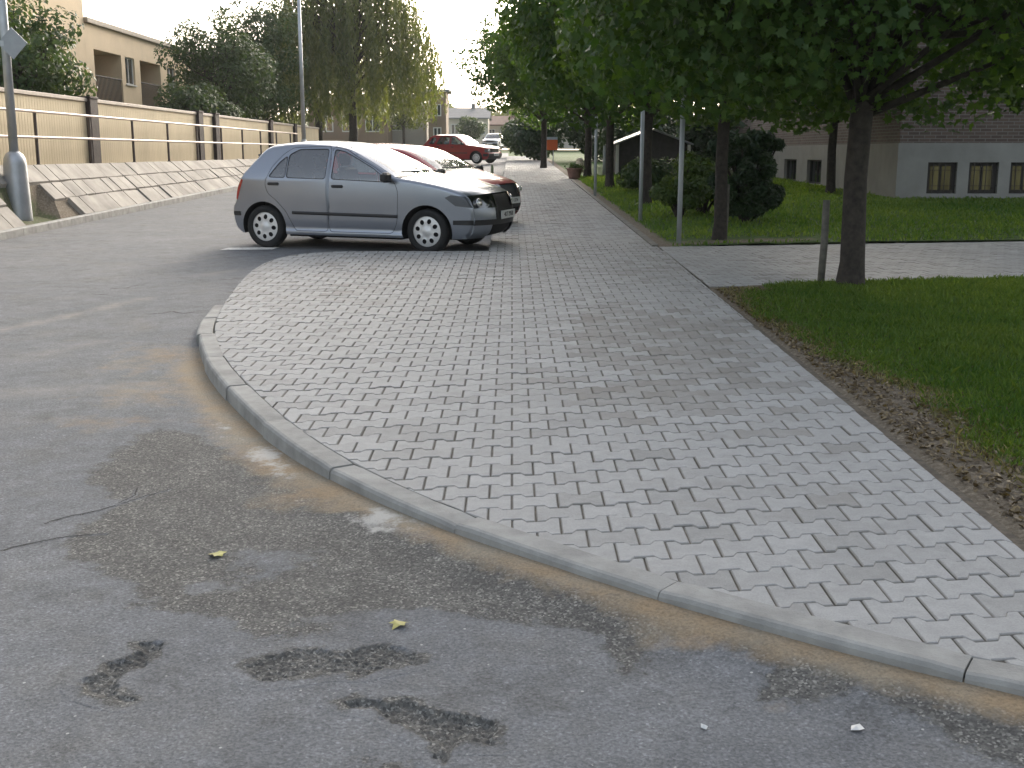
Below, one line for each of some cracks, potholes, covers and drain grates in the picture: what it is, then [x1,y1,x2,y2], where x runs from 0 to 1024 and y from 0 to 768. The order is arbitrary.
pothole [223,635,443,691]
pothole [57,635,180,713]
pothole [316,687,518,768]
crack [0,487,172,551]
